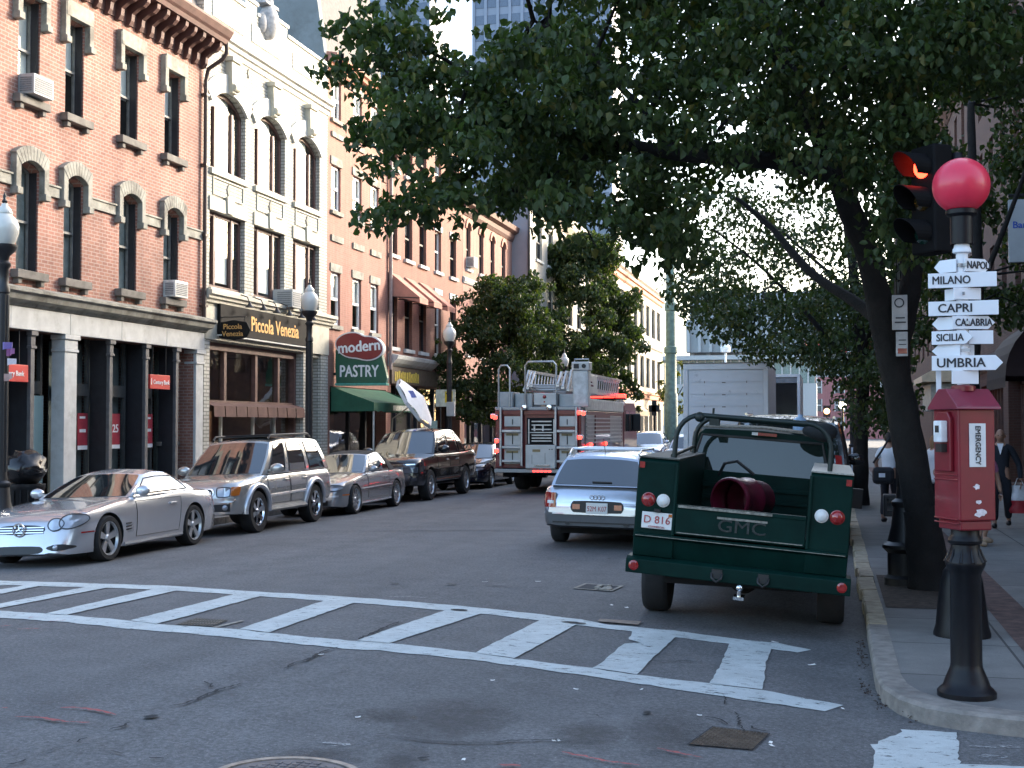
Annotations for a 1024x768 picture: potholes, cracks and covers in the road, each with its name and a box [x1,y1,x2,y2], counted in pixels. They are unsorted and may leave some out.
utility cover [574,583,622,591]
crack [175,681,241,705]
utility cover [687,726,770,750]
crack [284,647,337,668]
manhole cover [219,756,358,768]
drain grate [178,618,227,626]
